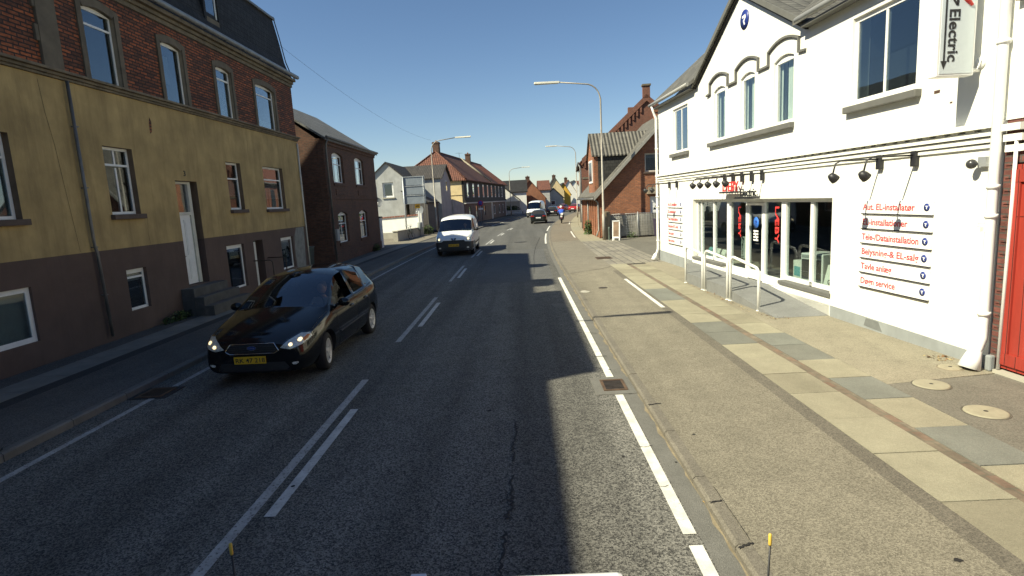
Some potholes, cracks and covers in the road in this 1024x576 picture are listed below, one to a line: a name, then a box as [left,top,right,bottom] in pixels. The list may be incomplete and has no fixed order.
crack [498,422,518,576]
manhole cover [960,405,1013,420]
manhole cover [910,379,953,391]
drain grate [127,386,186,400]
drain grate [590,376,637,396]
